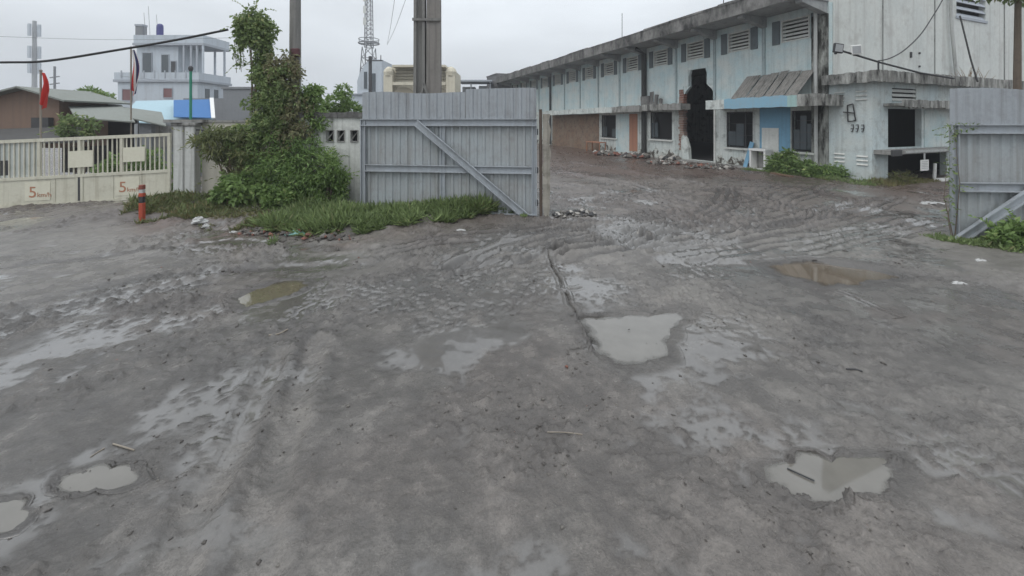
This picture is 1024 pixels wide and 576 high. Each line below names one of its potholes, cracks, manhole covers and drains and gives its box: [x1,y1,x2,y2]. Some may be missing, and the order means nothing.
pothole [219,277,318,313]
pothole [749,255,927,290]
pothole [743,444,921,517]
pothole [42,459,156,499]
pothole [567,303,705,379]
pothole [0,490,41,539]
crack [542,248,598,355]
